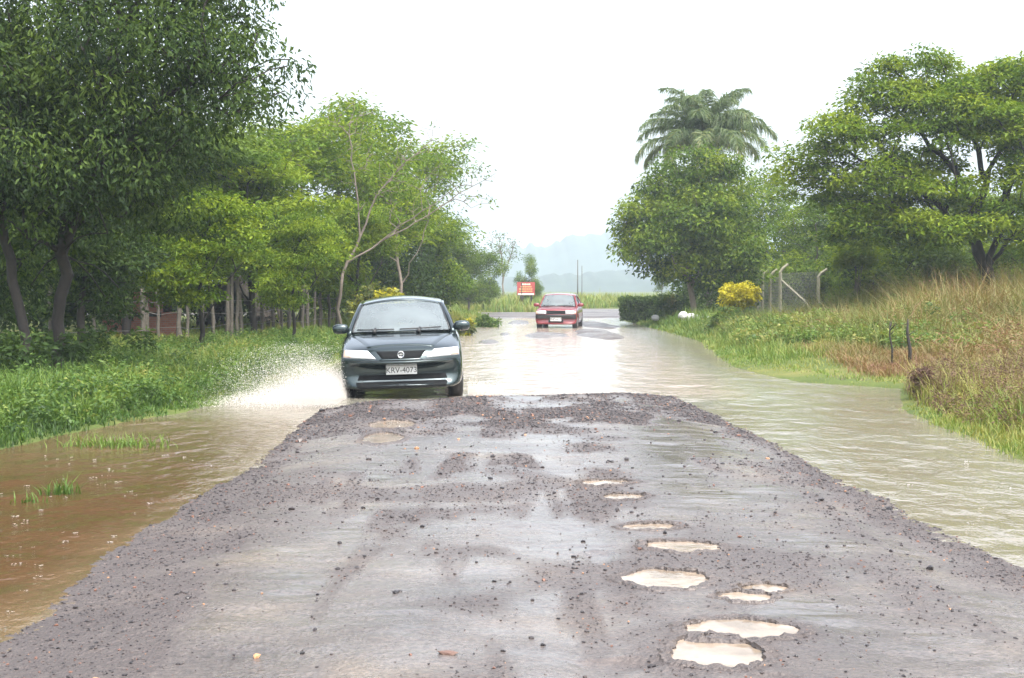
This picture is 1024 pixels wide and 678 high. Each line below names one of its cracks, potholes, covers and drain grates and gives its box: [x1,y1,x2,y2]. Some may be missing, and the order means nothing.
pothole [632,537,732,554]
pothole [355,429,412,446]
pothole [657,629,779,672]
pothole [706,587,782,604]
pothole [611,519,687,531]
pothole [575,477,641,487]
pothole [730,580,796,595]
pothole [360,417,423,430]
pothole [598,491,652,501]
pothole [667,613,816,644]
pothole [607,564,721,591]
